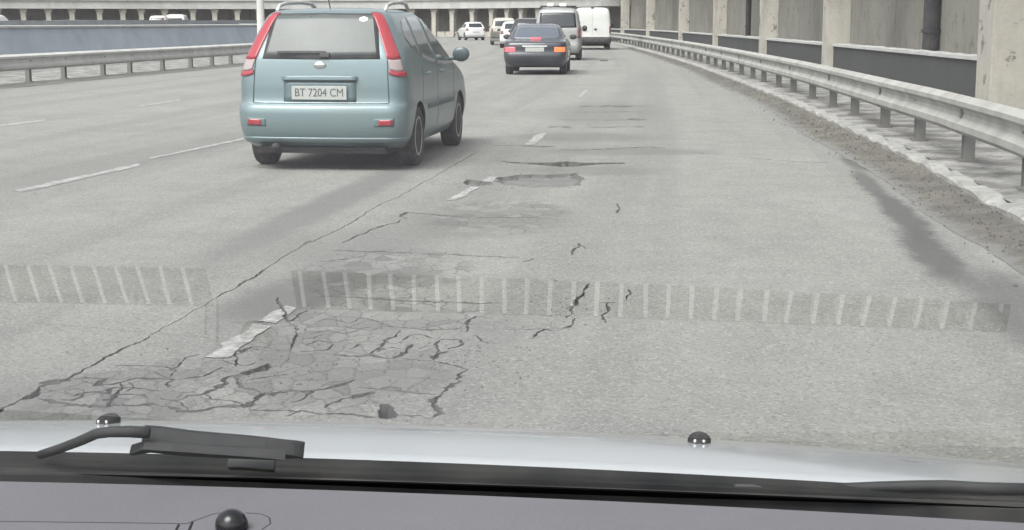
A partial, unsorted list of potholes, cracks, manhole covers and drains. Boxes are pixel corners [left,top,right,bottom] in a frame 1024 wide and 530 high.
crack [0,153,553,418]
pothole [377,403,398,420]
crack [505,279,632,339]
pothole [495,173,586,188]
